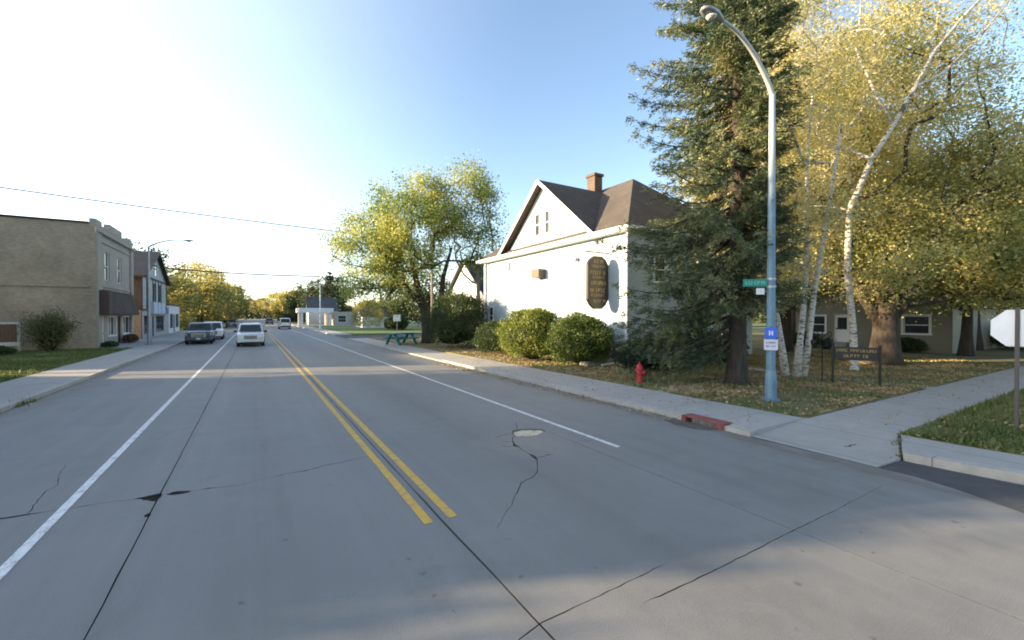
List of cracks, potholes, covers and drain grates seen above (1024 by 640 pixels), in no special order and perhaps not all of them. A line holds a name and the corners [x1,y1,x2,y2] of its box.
crack [498,425,549,523]
crack [0,456,369,519]
